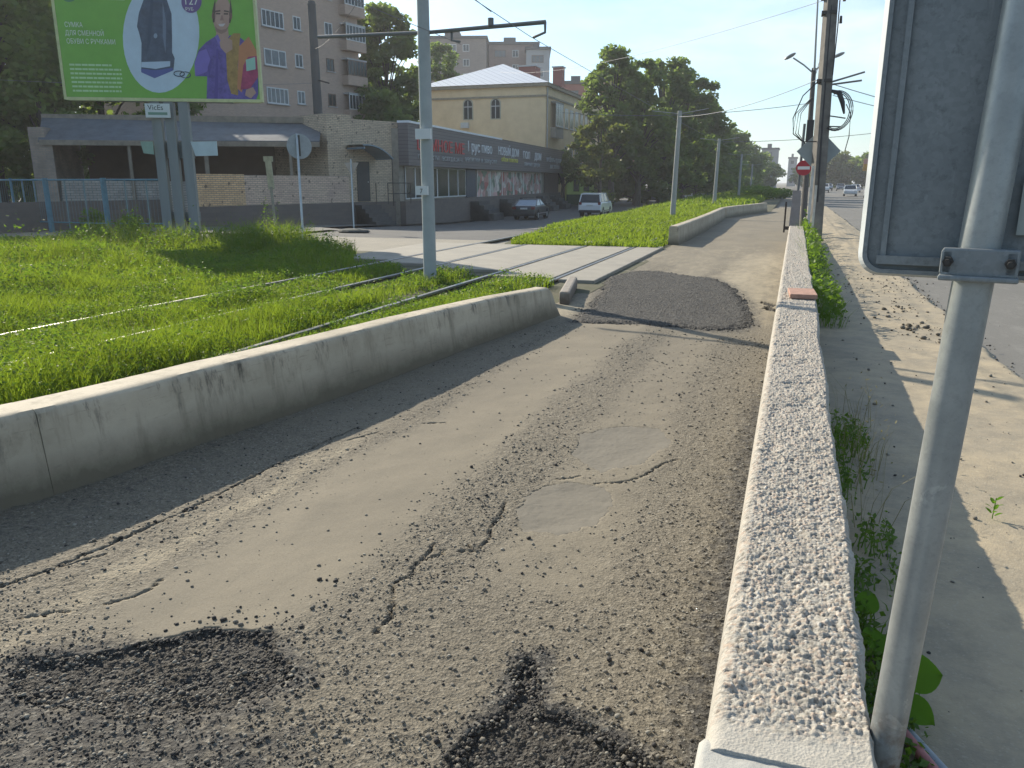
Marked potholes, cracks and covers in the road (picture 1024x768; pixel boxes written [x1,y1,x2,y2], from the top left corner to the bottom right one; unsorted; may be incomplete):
crack [460,504,506,553]
crack [374,546,440,634]
